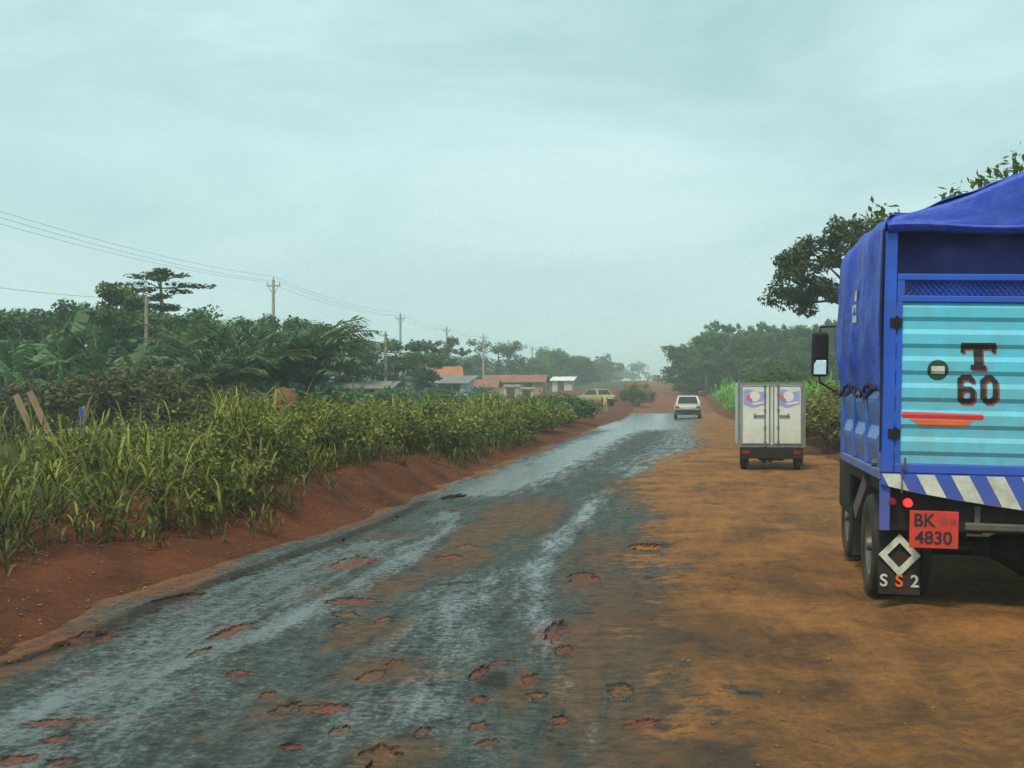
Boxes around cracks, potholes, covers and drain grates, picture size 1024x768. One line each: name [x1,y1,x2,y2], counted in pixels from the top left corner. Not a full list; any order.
pothole [553,644,575,656]
pothole [355,742,405,768]
pothole [606,681,635,702]
pothole [317,596,387,606]
pothole [621,717,662,730]
pothole [465,719,492,732]
pothole [467,664,491,682]
pothole [13,717,92,728]
pothole [412,725,434,737]
pothole [472,738,500,747]
pothole [520,672,539,686]
pothole [551,714,570,726]
